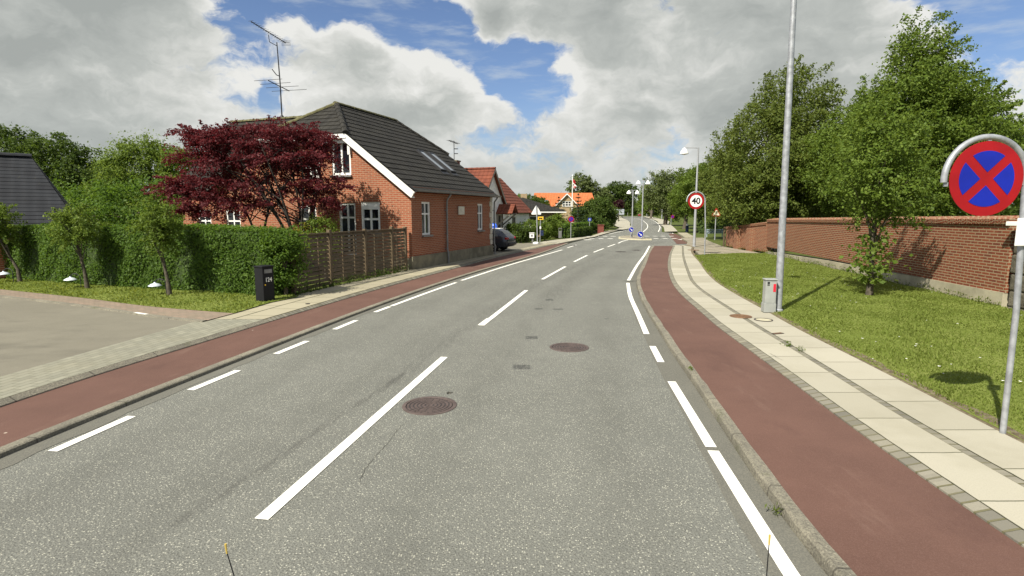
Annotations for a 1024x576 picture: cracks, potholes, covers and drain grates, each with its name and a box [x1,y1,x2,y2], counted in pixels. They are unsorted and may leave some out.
manhole cover [550,342,589,352]
manhole cover [402,396,457,415]
